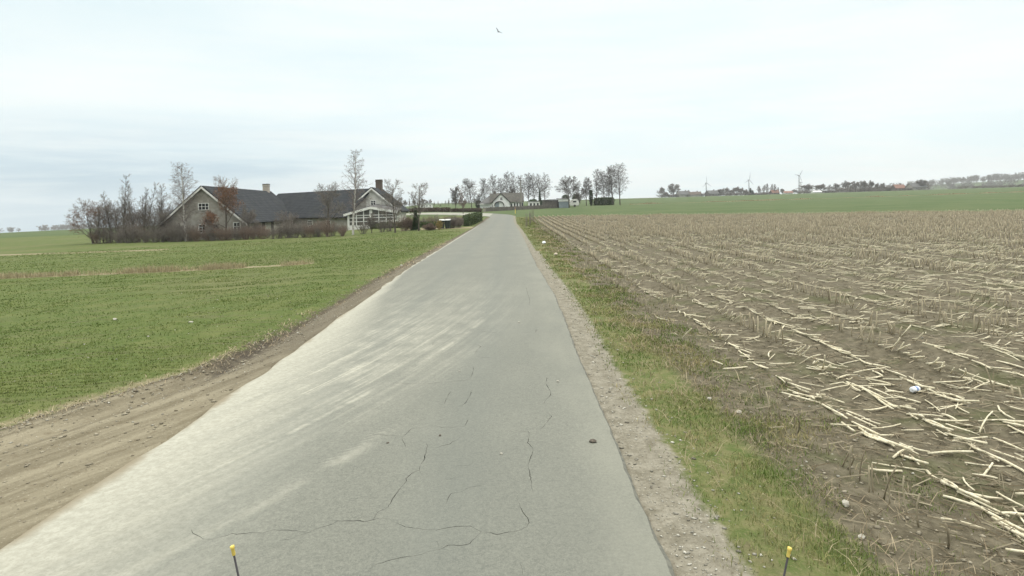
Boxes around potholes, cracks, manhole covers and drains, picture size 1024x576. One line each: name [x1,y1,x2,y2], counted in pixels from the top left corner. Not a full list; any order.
crack [192,331,493,540]
crack [371,503,529,568]
